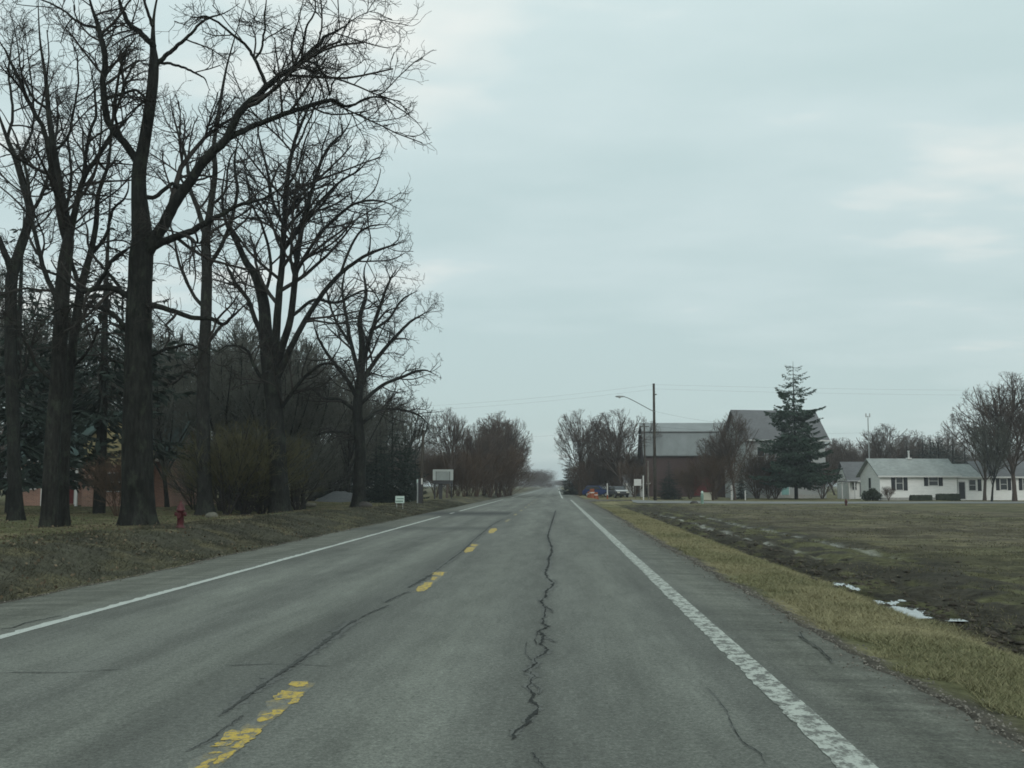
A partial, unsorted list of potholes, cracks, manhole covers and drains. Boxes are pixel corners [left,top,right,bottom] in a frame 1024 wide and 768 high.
crack [769,632,833,663]
crack [707,688,766,765]
crack [185,715,243,752]
crack [508,510,558,768]
